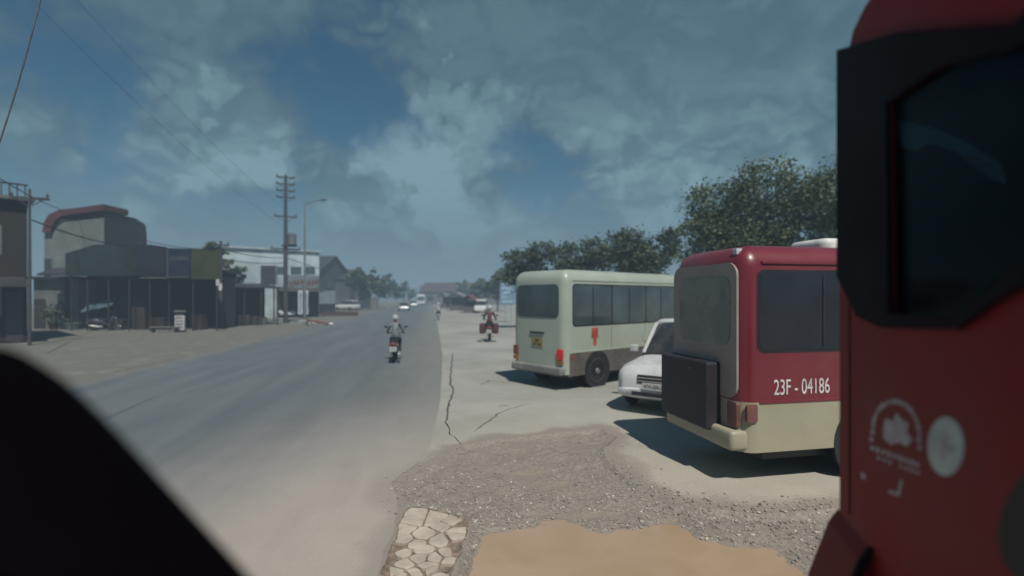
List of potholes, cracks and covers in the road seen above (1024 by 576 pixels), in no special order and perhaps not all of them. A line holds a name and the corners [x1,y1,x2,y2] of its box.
crack [444,352,527,444]
